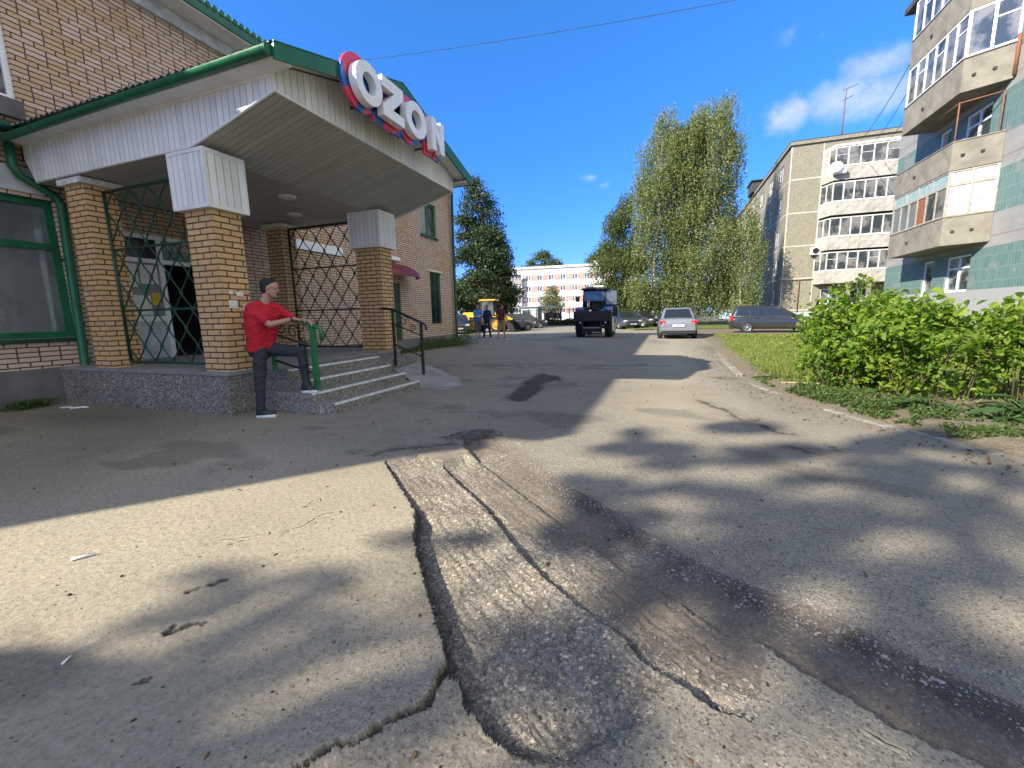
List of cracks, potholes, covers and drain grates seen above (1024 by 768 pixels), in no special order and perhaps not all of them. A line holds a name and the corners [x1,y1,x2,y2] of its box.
crack [208,498,340,546]
crack [296,667,447,768]
crack [696,399,818,455]
